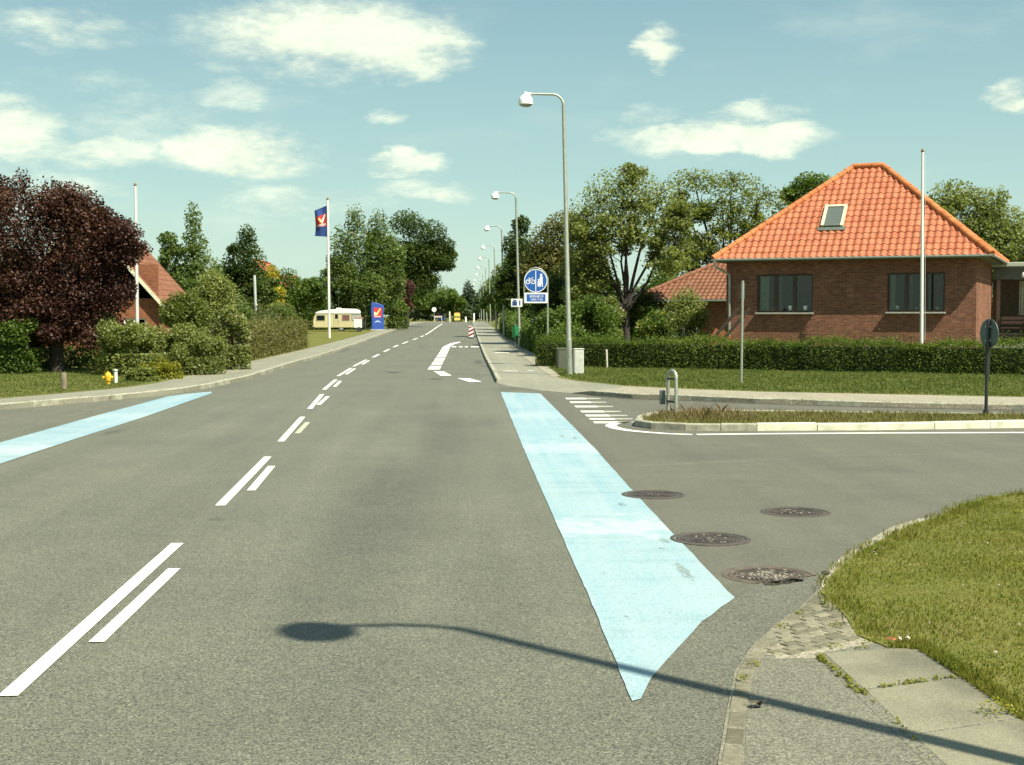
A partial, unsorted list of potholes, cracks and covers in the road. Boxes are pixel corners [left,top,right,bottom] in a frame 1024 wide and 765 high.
manhole cover [760,507,831,518]
manhole cover [670,532,751,546]
manhole cover [721,566,815,584]
manhole cover [622,490,685,499]
